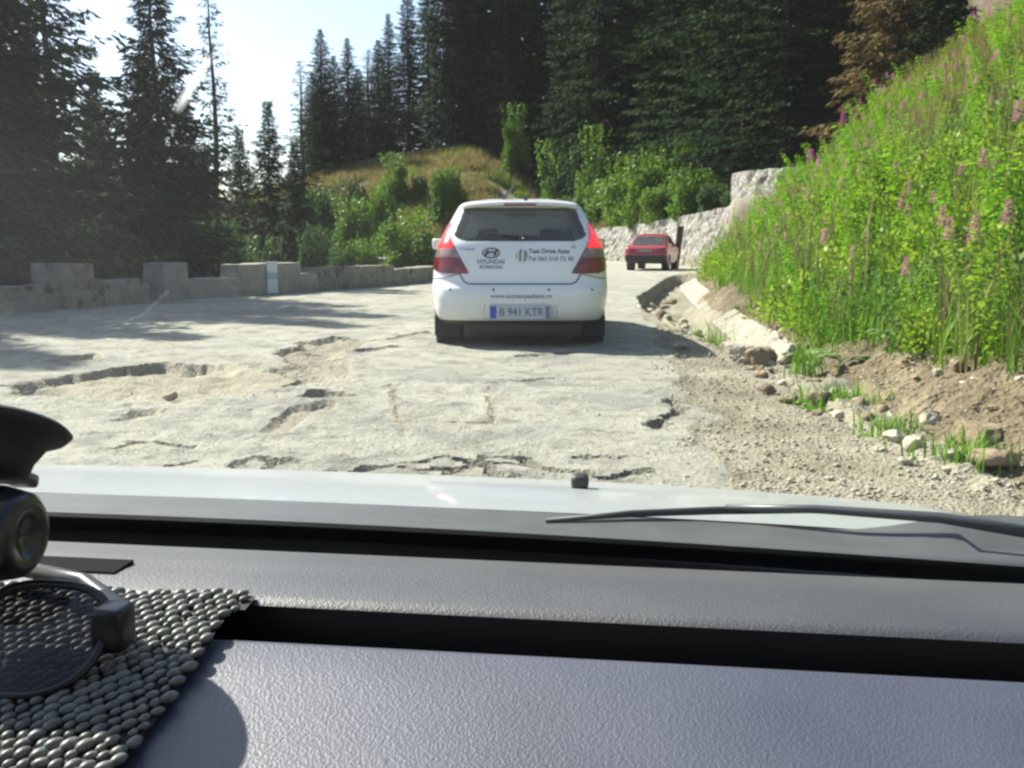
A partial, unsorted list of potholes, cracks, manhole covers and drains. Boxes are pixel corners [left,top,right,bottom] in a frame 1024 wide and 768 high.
pothole [268,336,365,387]
pothole [258,399,341,434]
pothole [297,389,360,398]
crack [320,454,657,481]
crack [386,377,559,425]
pothole [5,361,297,404]
